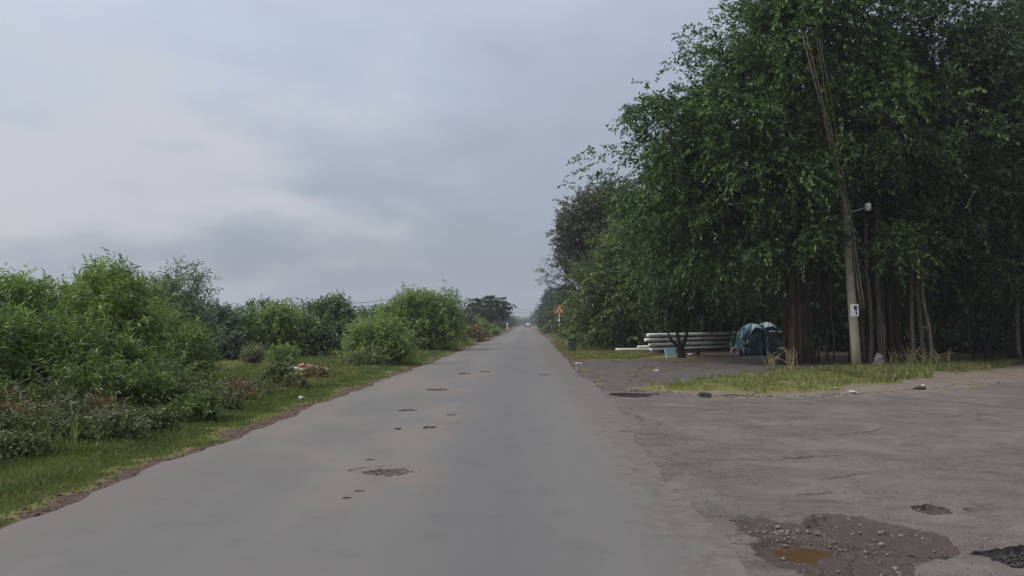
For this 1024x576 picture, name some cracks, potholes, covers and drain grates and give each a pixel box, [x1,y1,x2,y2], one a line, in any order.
pothole [729,510,967,576]
pothole [969,545,1024,568]
pothole [347,465,421,477]
pothole [911,504,953,515]
crack [779,455,870,496]
